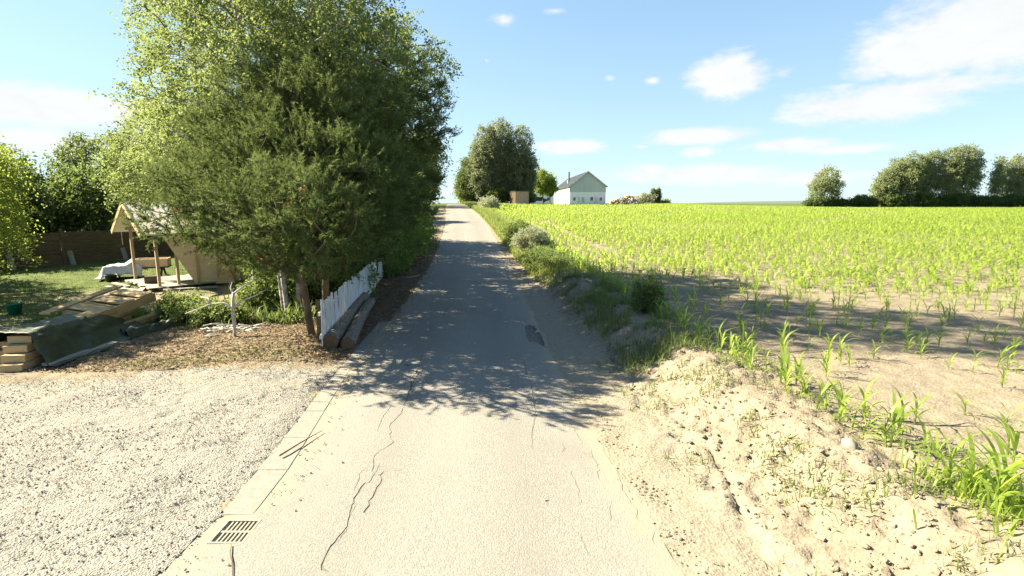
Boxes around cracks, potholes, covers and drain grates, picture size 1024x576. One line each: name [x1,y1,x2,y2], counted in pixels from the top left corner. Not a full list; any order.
pothole [525,325,546,347]
crack [321,355,423,572]
drain grate [207,519,262,544]
